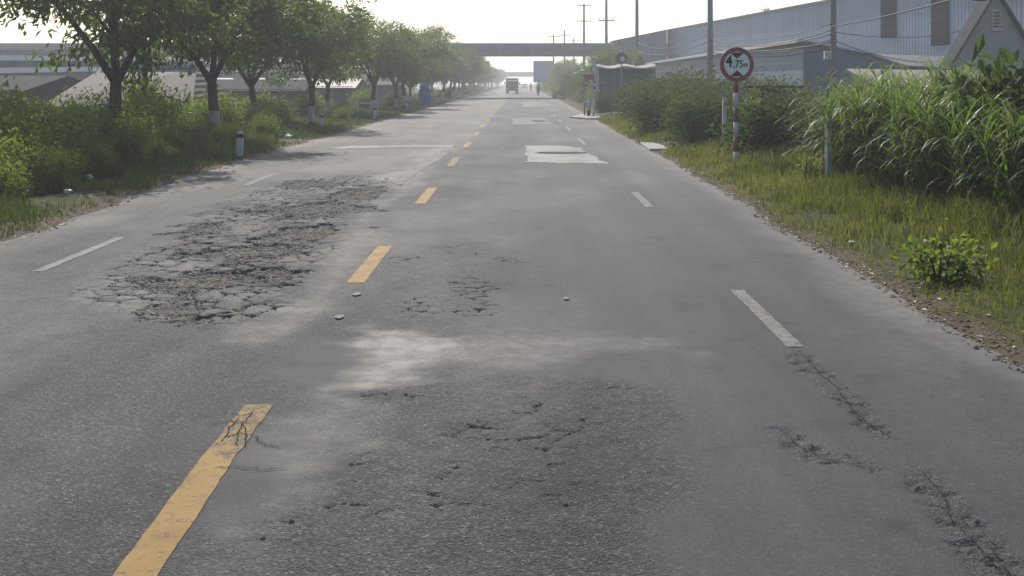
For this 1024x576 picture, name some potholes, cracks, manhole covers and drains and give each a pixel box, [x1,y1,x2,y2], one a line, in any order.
crack [912,471,1018,576]
pothole [152,222,233,242]
pothole [132,297,246,327]
pothole [261,179,355,195]
pothole [231,221,377,247]
pothole [125,268,268,298]
pothole [236,267,315,286]
pothole [233,202,281,218]
crack [800,351,890,437]
pothole [319,185,386,201]
crack [391,246,521,318]
crack [214,412,290,470]
